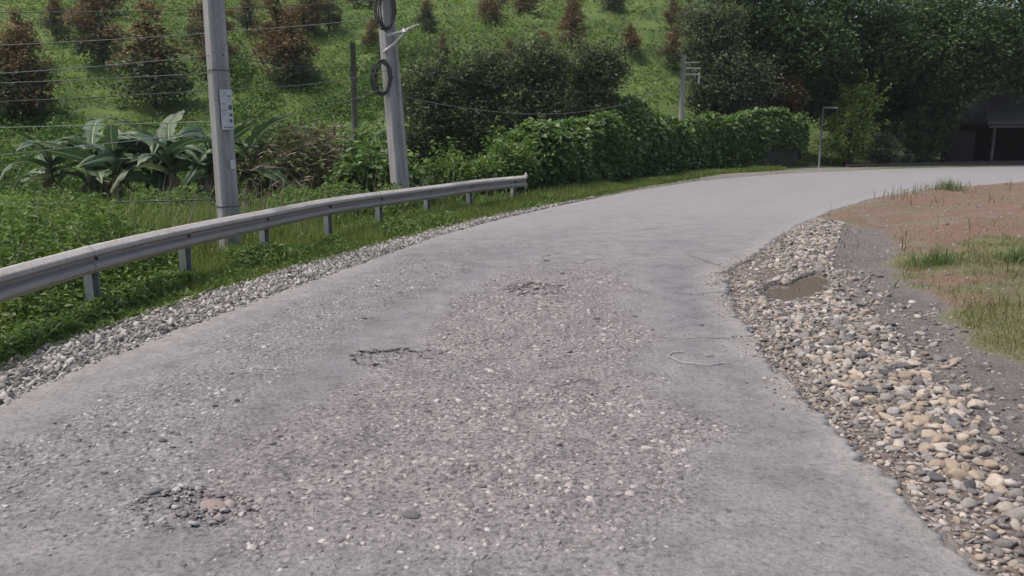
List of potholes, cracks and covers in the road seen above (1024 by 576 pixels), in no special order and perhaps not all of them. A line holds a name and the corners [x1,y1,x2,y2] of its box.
pothole [348,347,432,368]
pothole [497,281,575,297]
pothole [121,484,266,533]
